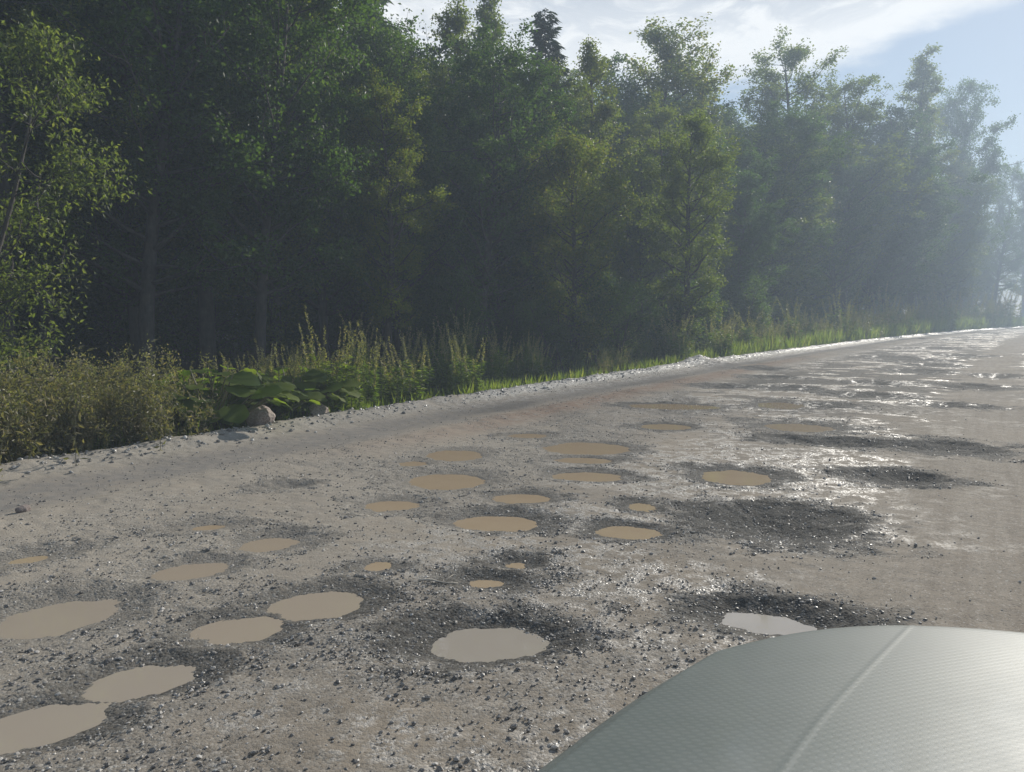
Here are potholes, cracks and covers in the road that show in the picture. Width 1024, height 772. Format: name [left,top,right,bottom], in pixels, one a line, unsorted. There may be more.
pothole [656,589,879,640]
pothole [417,504,577,535]
pothole [410,445,506,465]
pothole [669,462,800,491]
pothole [335,492,453,518]
pothole [0,576,179,652]
pothole [371,465,519,494]
pothole [822,465,981,489]
pothole [156,577,403,657]
pothole [0,645,250,764]
